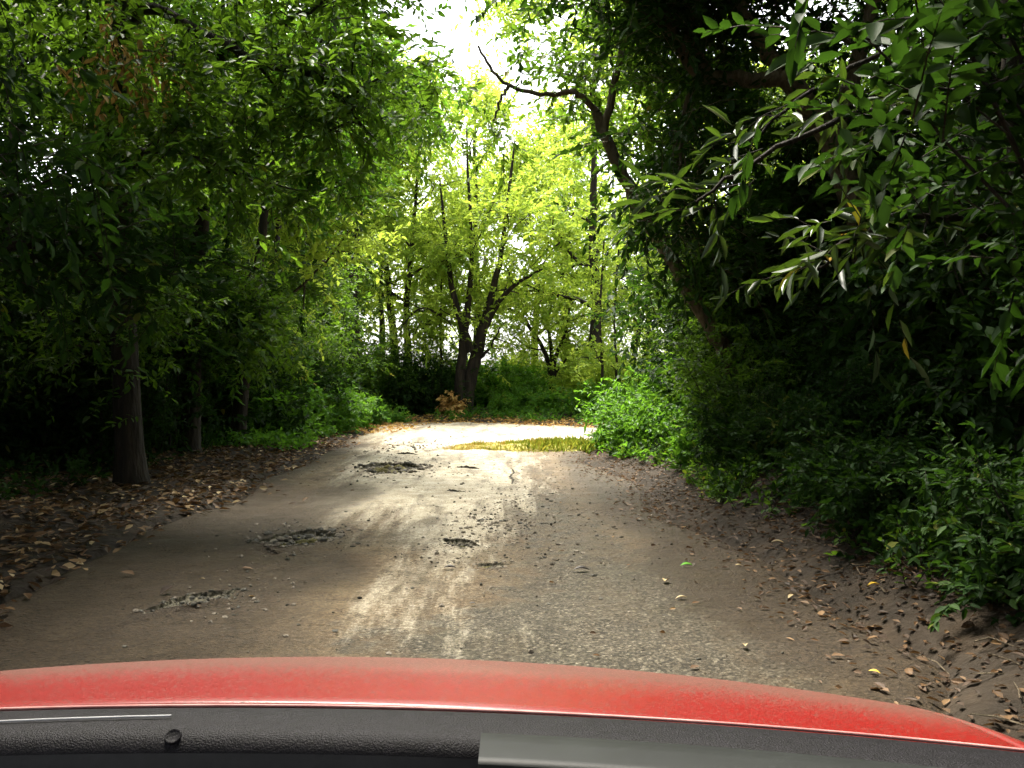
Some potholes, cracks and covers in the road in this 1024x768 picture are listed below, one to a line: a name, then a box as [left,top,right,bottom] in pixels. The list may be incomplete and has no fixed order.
pothole [133,587,247,613]
crack [508,468,521,484]
pothole [468,560,511,570]
pothole [354,461,433,475]
pothole [246,527,345,548]
pothole [438,537,484,549]
